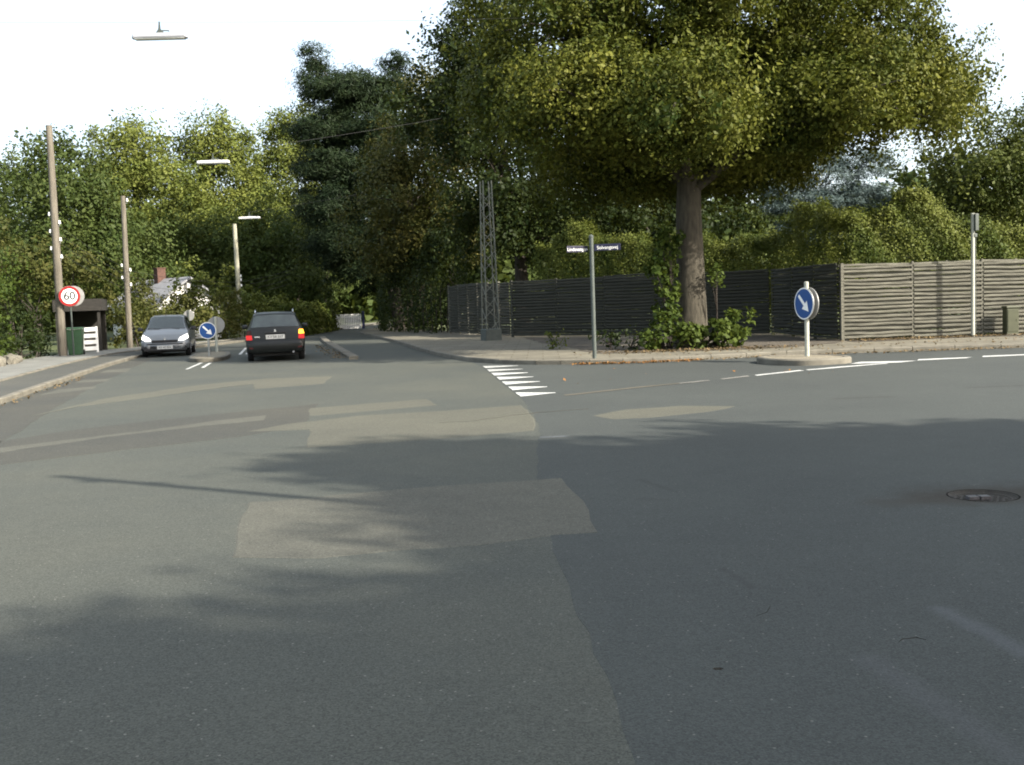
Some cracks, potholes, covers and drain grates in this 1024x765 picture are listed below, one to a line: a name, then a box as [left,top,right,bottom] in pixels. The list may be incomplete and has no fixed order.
manhole cover [946,489,1021,502]
